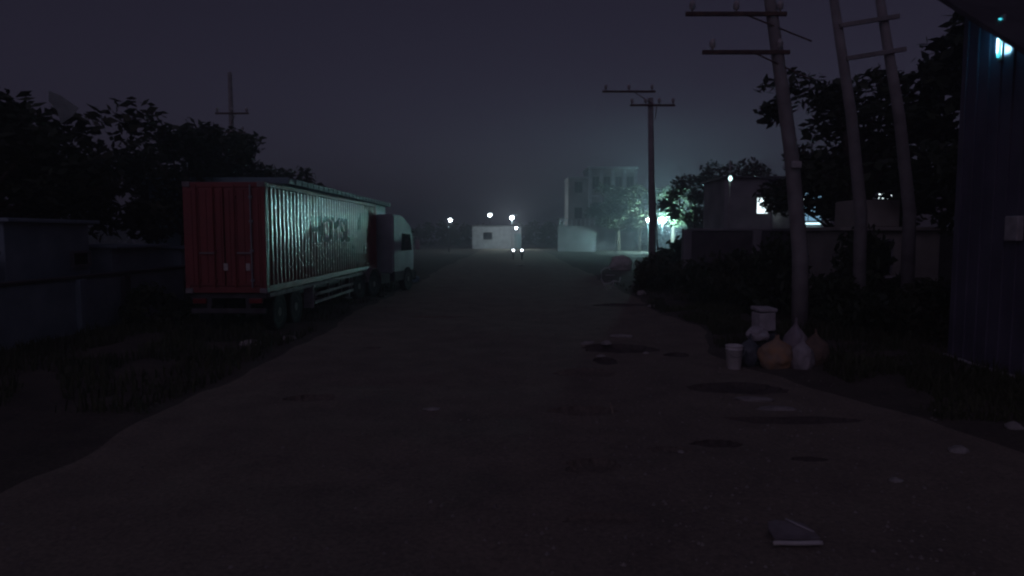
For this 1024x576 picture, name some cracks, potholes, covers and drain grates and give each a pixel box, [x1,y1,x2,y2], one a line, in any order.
pothole [689,439,743,448]
pothole [685,382,789,395]
pothole [581,343,660,353]
pothole [593,357,618,365]
pothole [721,416,865,424]
